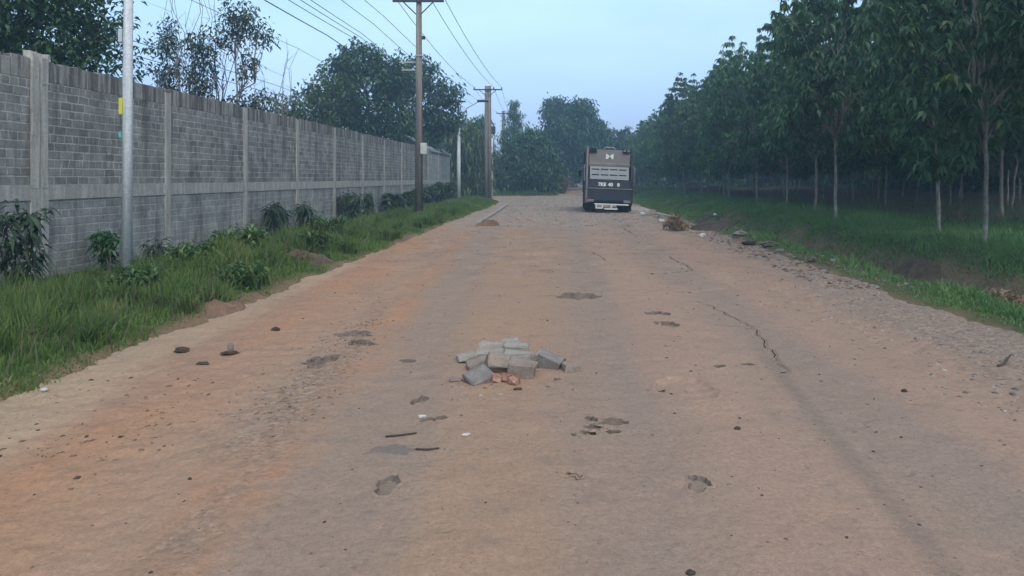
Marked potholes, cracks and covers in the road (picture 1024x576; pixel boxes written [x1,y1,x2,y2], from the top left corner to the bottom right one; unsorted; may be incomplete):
pothole [332,329,375,338]
pothole [596,428,625,436]
pothole [370,474,406,498]
pothole [345,339,381,348]
pothole [581,415,601,424]
pothole [684,474,716,495]
crack [653,256,790,373]
pothole [580,423,608,432]
pothole [555,292,604,300]
pothole [595,417,632,428]
pothole [575,428,608,437]
pothole [299,354,344,370]
